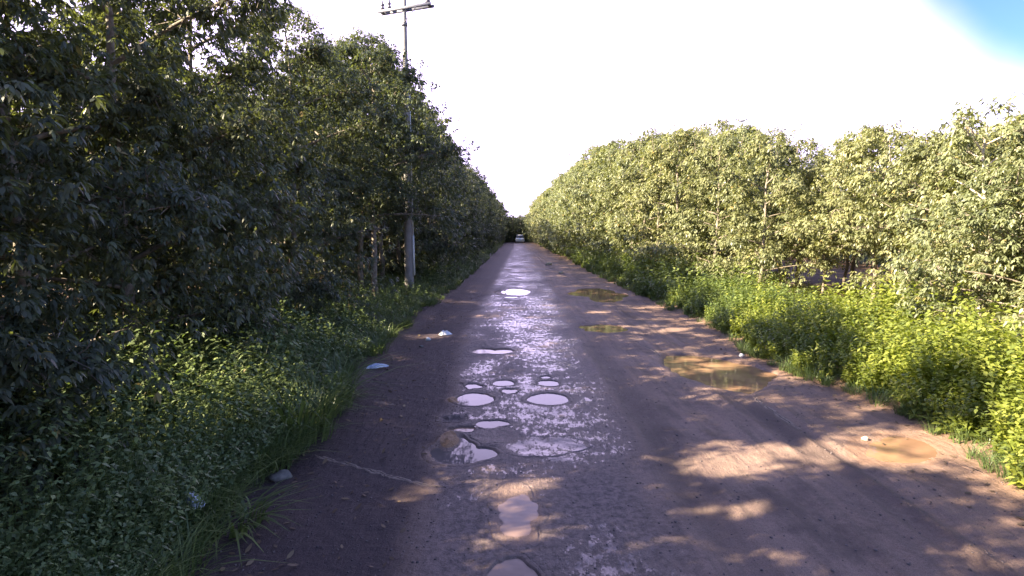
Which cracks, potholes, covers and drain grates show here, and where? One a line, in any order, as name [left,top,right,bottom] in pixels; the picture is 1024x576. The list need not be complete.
pothole [521,391,574,406]
pothole [466,347,520,355]
pothole [536,379,561,387]
pothole [447,391,500,407]
pothole [561,286,635,305]
pothole [652,350,793,399]
pothole [572,323,635,334]
pothole [421,430,507,467]
pothole [472,419,514,429]
crack [315,454,445,487]
pothole [842,429,959,471]
pothole [501,288,534,296]
